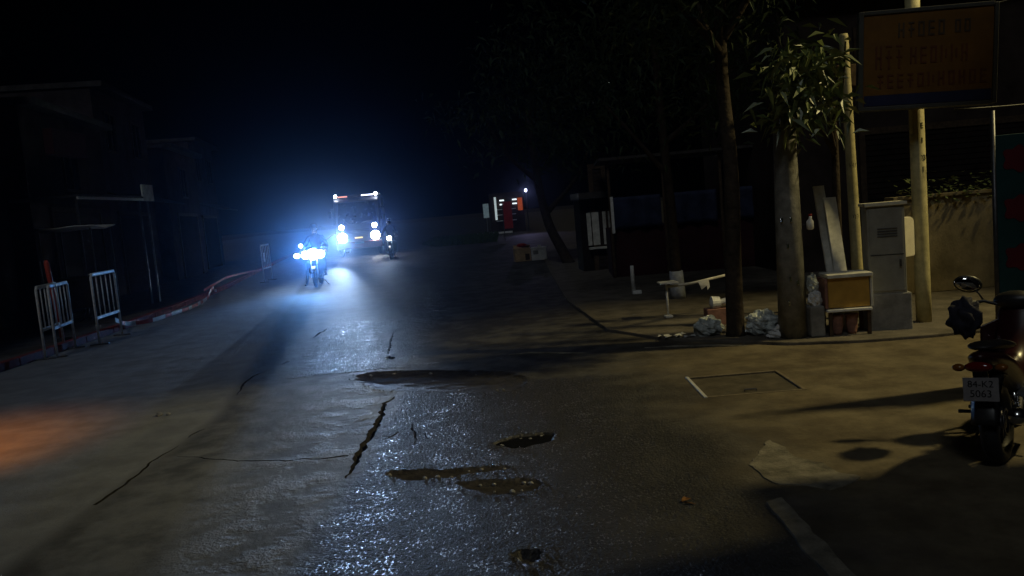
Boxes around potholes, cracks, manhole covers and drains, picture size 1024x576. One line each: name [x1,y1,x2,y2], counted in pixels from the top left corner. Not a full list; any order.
manhole cover [685,370,807,398]
pothole [385,462,515,482]
pothole [448,474,548,500]
pothole [488,429,565,452]
pothole [349,369,532,393]
pothole [509,545,557,570]
crack [93,397,430,505]
